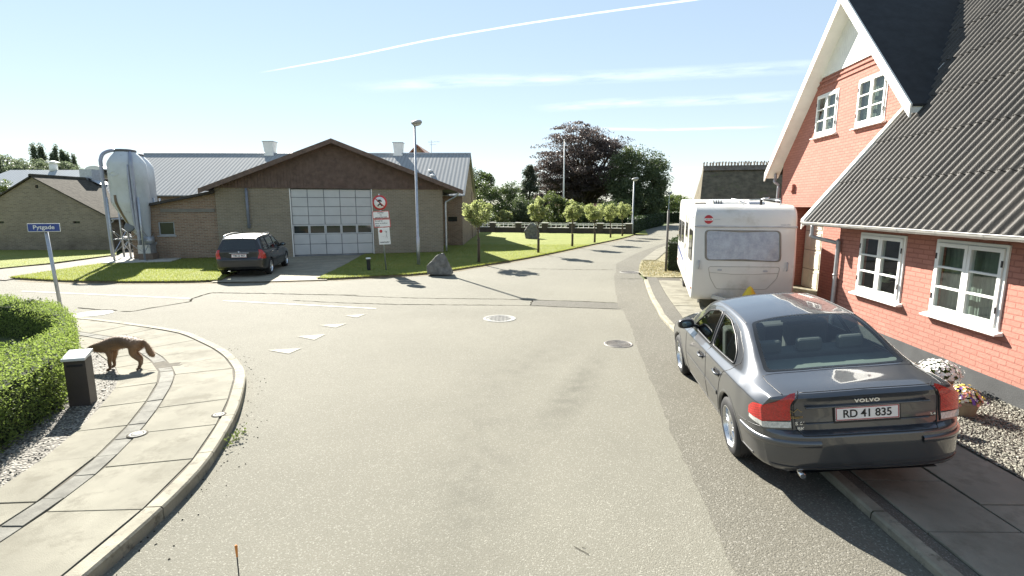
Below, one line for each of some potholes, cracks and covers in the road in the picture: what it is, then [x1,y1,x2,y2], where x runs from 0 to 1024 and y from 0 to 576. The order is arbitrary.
manhole cover [604,340,633,348]
utility cover [126,430,149,439]
